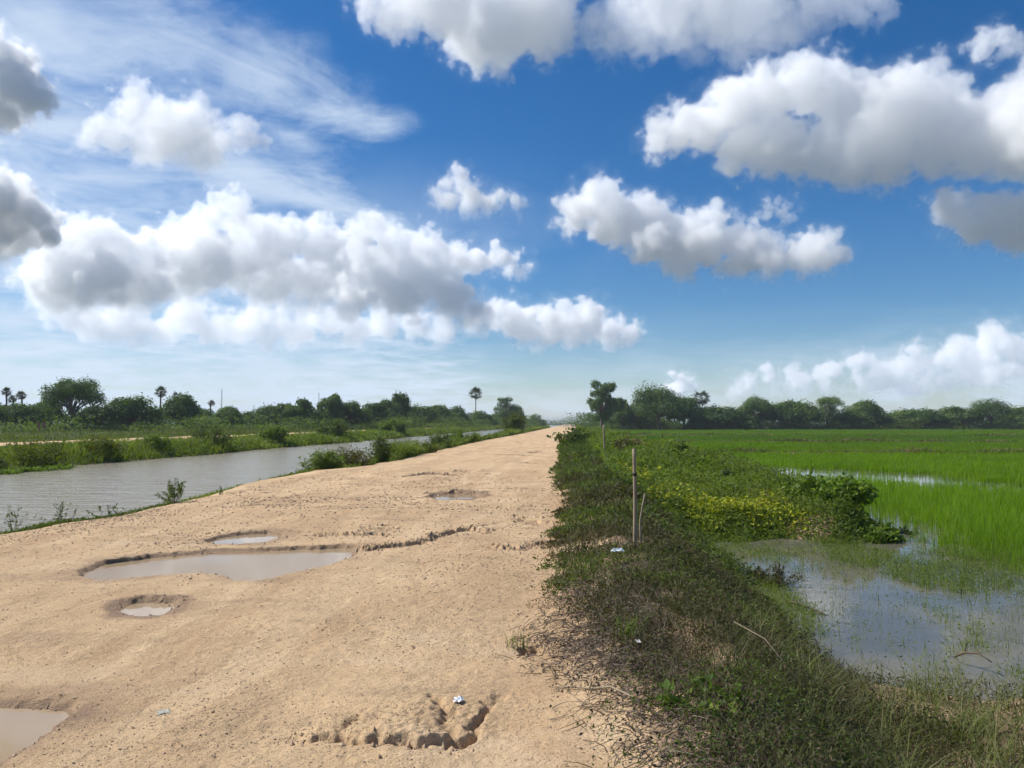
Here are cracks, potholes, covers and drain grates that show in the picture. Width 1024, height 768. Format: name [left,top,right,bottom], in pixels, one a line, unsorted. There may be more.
pothole [71,543,368,582]
pothole [0,692,93,768]
pothole [202,530,289,545]
crack [310,524,554,553]
pothole [418,489,494,500]
pothole [81,594,205,618]
